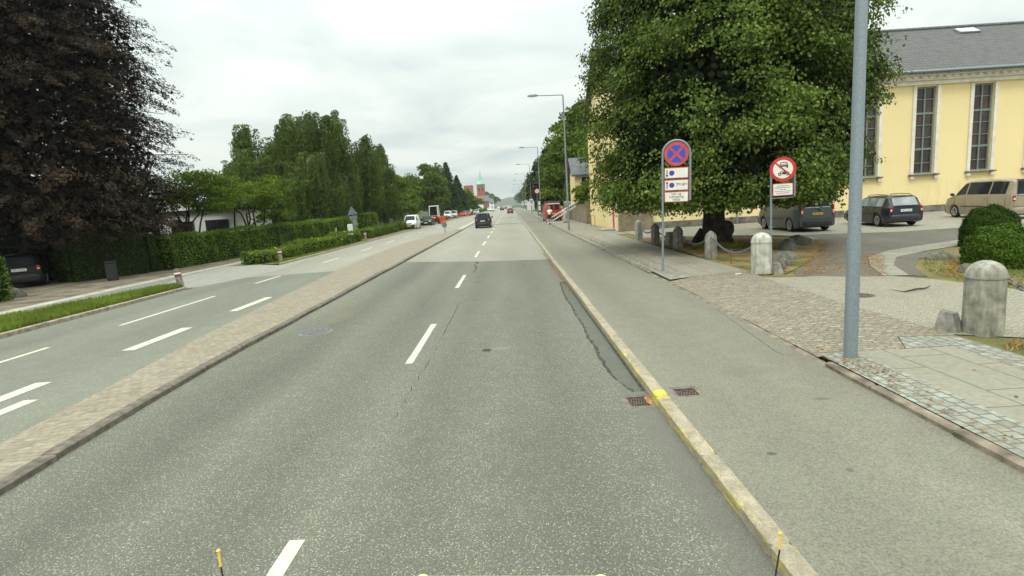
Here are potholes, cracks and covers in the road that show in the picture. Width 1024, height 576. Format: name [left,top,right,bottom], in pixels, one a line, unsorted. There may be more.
drain grate [669,386,704,397]
manhole cover [298,328,333,336]
drain grate [619,394,657,408]
